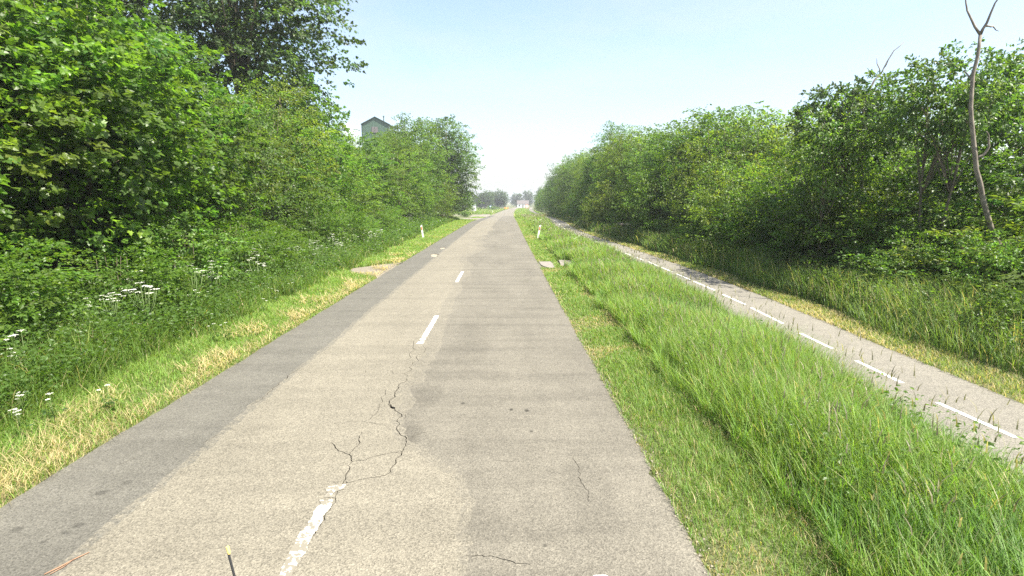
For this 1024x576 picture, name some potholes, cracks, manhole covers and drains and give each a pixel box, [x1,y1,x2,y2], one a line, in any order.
crack [281,337,430,567]
